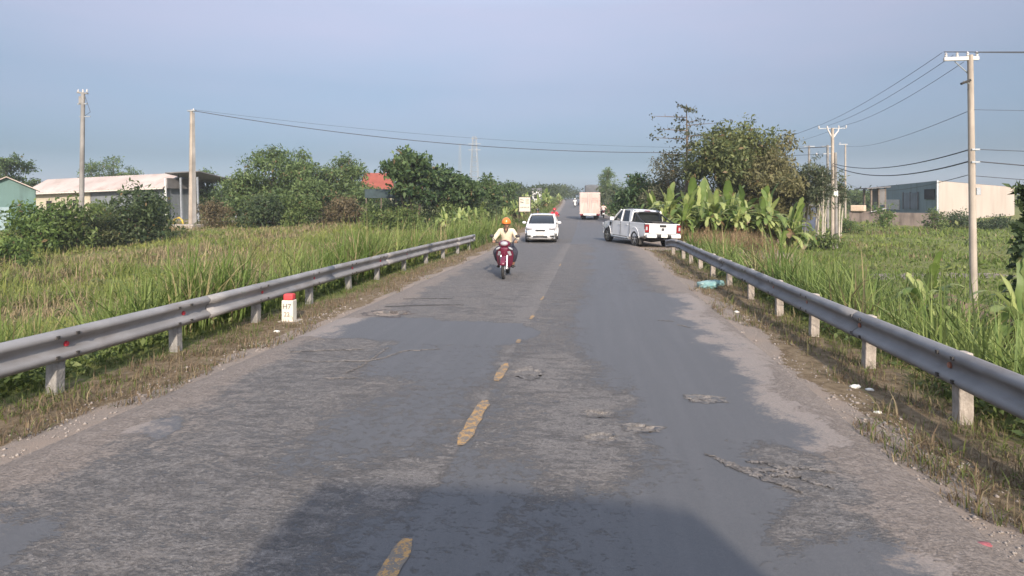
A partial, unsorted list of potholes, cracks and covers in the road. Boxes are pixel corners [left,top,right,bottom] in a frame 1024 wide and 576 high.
pothole [581,409,620,418]
pothole [574,431,627,446]
crack [290,347,438,379]
pothole [360,309,416,318]
pothole [504,365,545,381]
pothole [683,394,730,404]
pothole [618,422,667,433]
